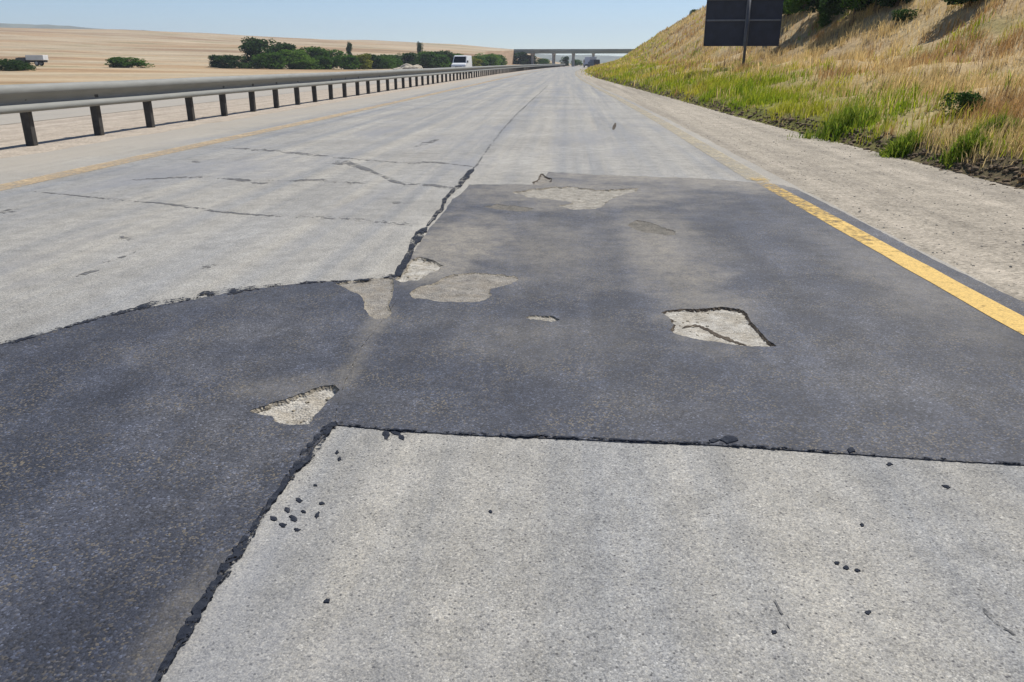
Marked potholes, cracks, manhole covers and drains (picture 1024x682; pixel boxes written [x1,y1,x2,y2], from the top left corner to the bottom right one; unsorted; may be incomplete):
crack [35,191,428,228]
crack [133,139,472,188]
pothole [395,257,443,282]
pothole [662,307,776,347]
pothole [251,385,339,425]
